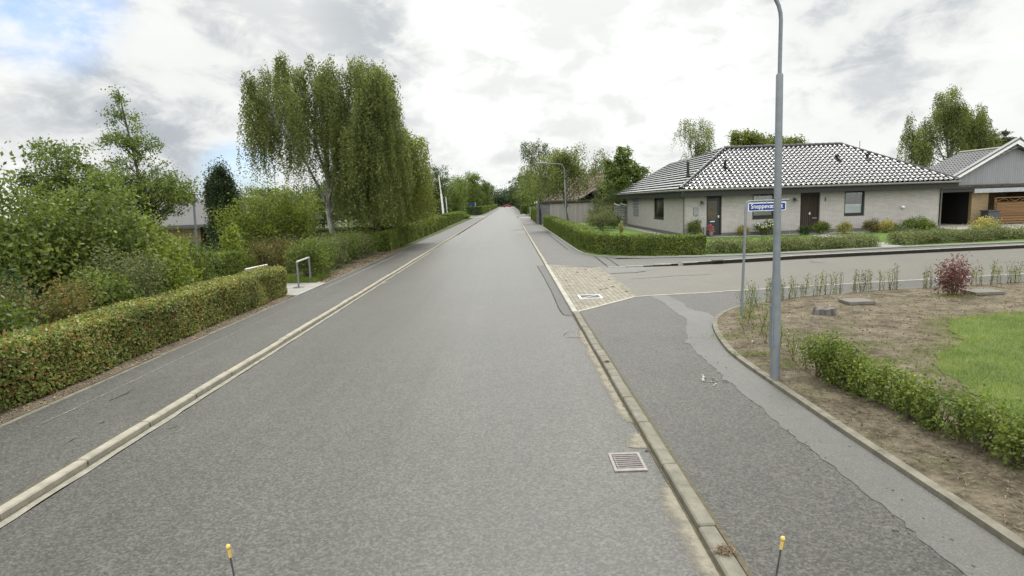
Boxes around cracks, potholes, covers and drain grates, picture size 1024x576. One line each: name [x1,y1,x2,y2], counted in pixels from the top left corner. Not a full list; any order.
drain grate [608,452,648,472]
